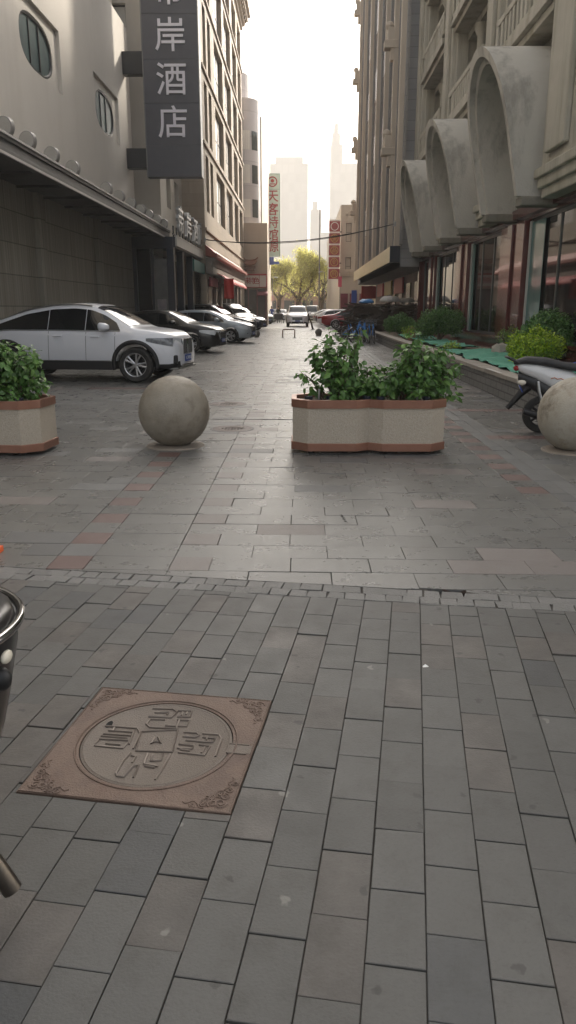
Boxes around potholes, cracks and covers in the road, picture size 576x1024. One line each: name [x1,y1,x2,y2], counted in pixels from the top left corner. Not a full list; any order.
manhole cover [16,687,272,816]
